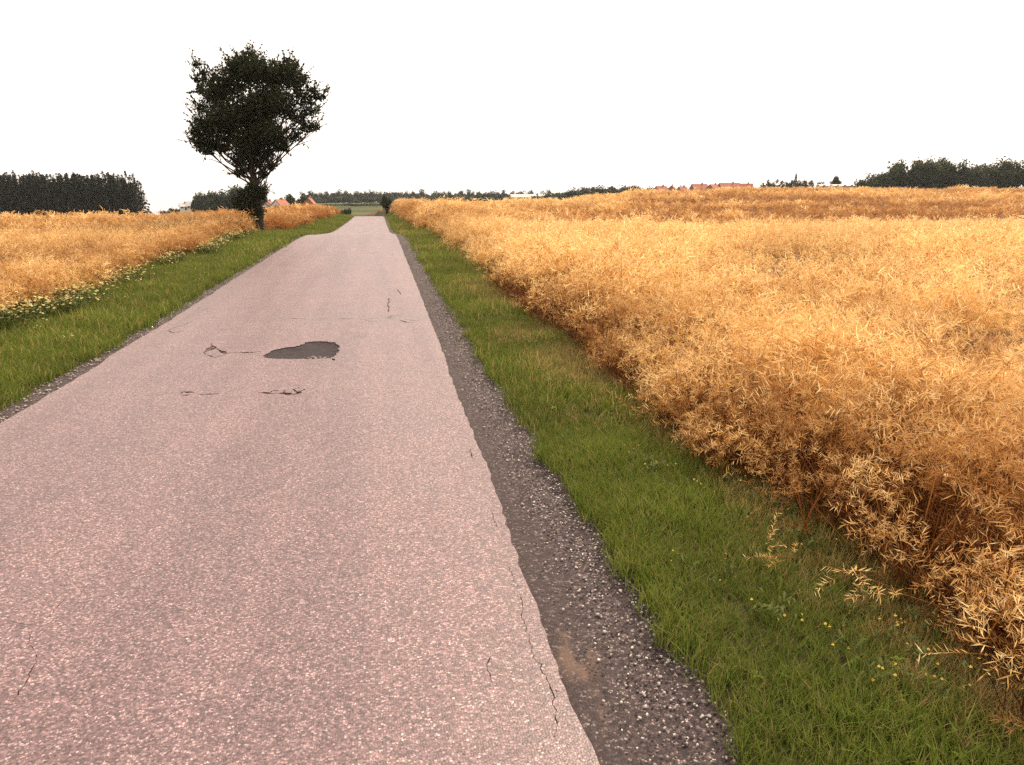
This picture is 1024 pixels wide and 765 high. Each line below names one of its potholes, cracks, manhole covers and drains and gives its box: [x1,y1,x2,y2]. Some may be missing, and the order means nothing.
crack [13,599,65,700]
crack [259,387,305,395]
